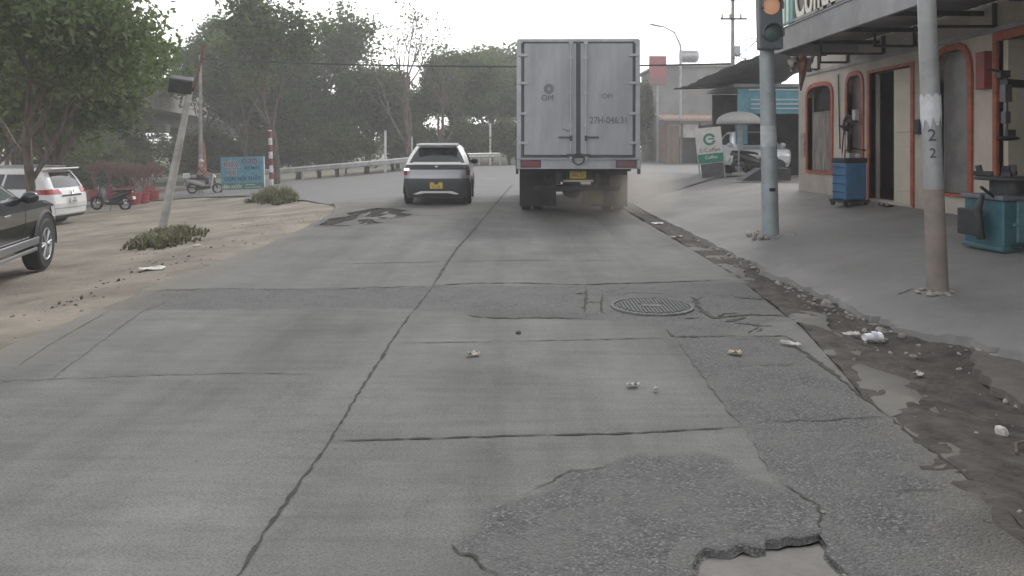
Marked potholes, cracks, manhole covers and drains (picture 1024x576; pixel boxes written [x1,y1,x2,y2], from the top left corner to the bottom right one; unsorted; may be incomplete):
manhole cover [611,297,694,316]
pothole [666,526,874,576]
crack [666,295,822,531]
